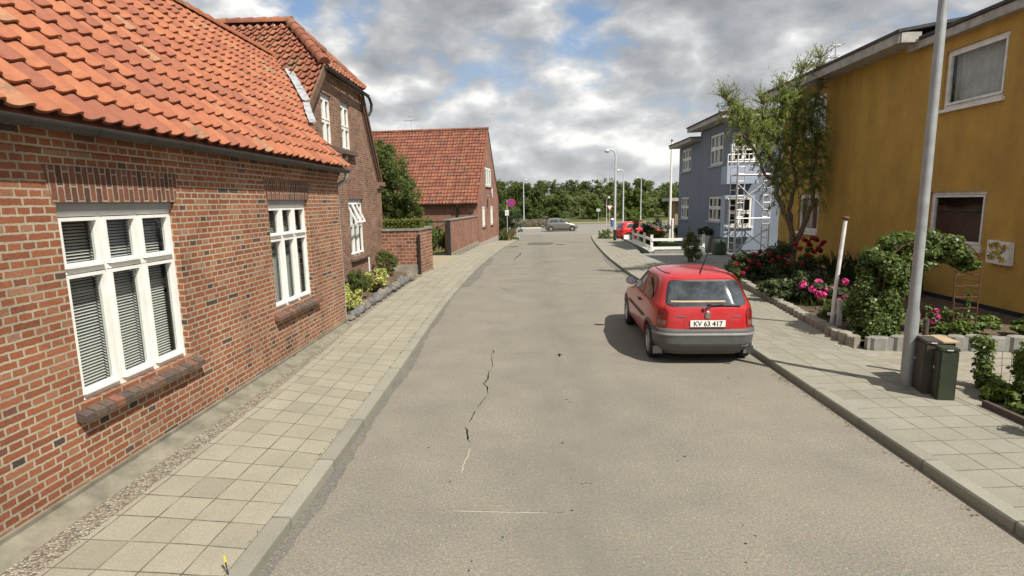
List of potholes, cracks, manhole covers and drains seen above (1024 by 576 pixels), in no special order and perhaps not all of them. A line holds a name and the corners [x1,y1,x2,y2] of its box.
crack [461,352,494,474]
